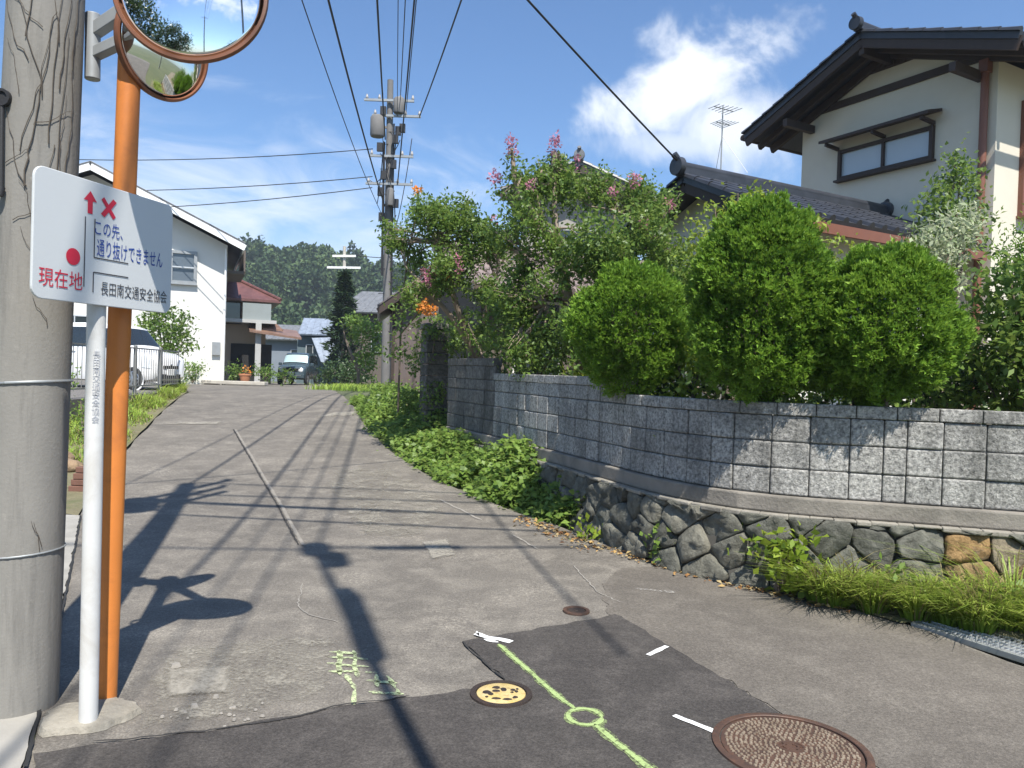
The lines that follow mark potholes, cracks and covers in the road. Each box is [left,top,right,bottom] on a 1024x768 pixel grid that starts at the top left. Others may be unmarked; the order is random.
manhole cover [712,712,876,768]
drain grate [911,620,1024,666]
crack [441,500,482,520]
utility cover [470,680,532,708]
utility cover [563,606,590,616]
